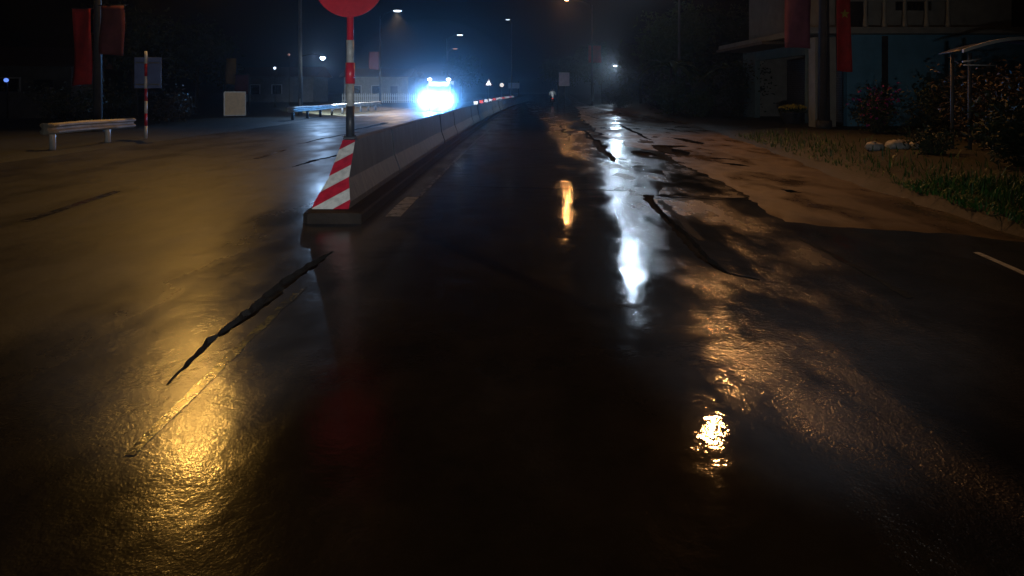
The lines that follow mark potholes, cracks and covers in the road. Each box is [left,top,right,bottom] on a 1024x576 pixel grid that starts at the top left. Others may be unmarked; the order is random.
crack [294,123,387,167]
crack [166,251,334,385]
crack [447,180,789,280]
crack [559,122,651,162]
